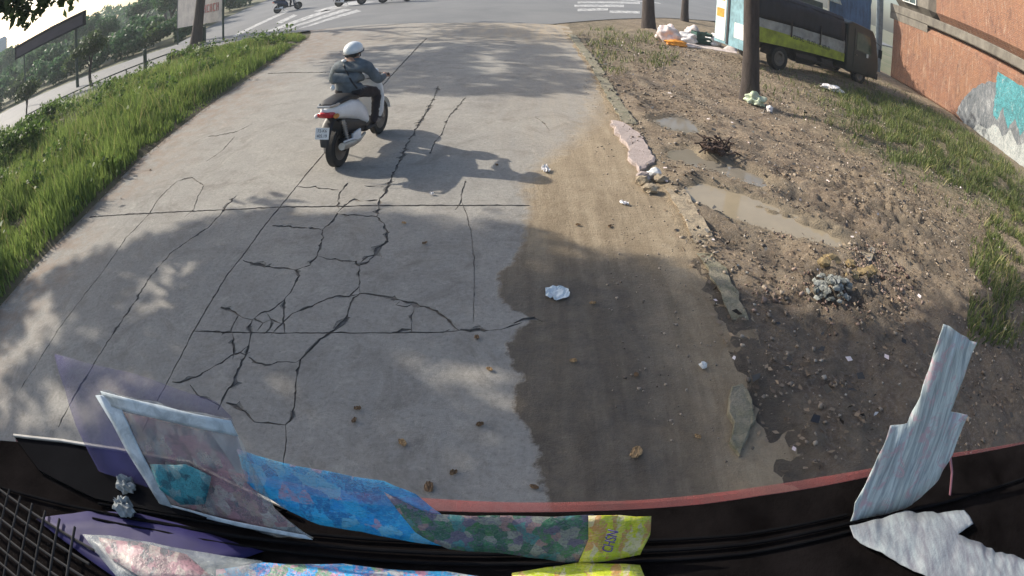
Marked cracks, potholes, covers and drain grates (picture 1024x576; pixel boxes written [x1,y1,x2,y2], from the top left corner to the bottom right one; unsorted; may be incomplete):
crack [172,86,522,472]
crack [21,128,244,427]
